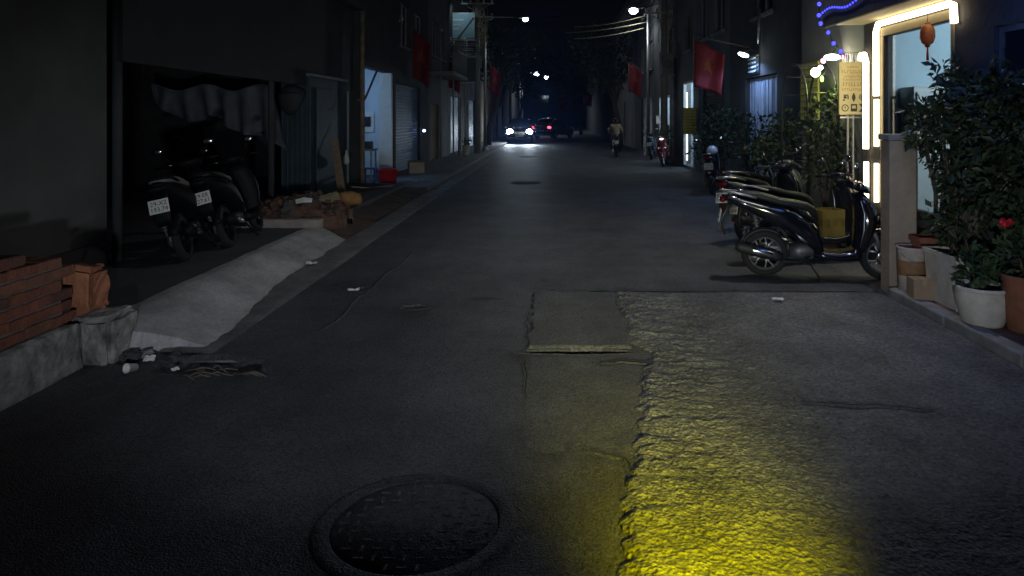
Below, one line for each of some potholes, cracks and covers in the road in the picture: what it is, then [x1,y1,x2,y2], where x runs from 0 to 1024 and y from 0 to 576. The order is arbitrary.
crack [315,252,414,332]
manhole cover [309,473,517,576]
crack [521,308,532,400]
crack [800,401,935,412]
